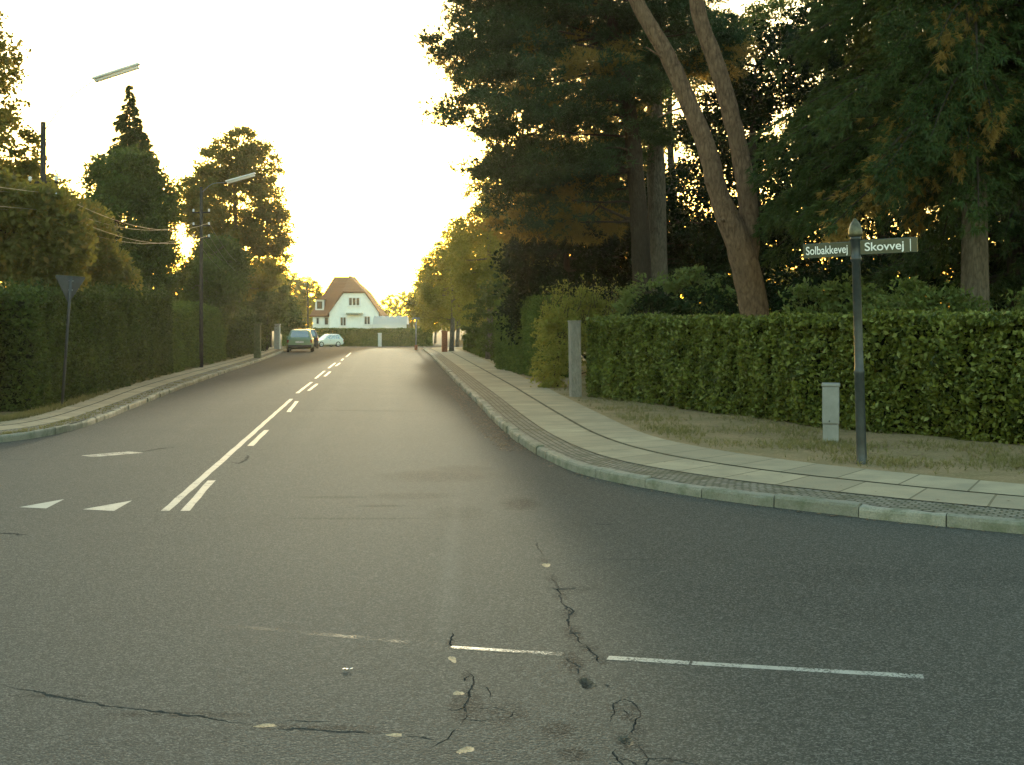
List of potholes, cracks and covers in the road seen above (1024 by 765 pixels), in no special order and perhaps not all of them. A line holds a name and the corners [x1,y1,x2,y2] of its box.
crack [590,684,698,765]
pothole [579,678,597,689]
crack [0,633,514,748]
crack [535,540,604,675]
